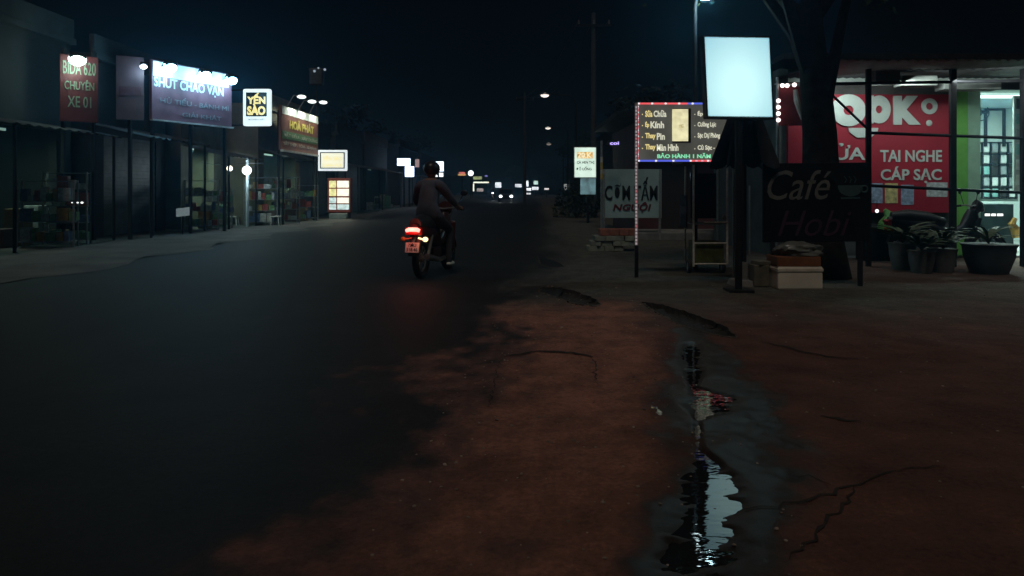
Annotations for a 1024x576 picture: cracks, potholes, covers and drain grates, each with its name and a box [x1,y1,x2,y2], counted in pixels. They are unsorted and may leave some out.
crack [744,465,940,559]
pothole [640,301,739,339]
pothole [538,287,602,306]
crack [761,341,858,359]
crack [487,350,597,407]
